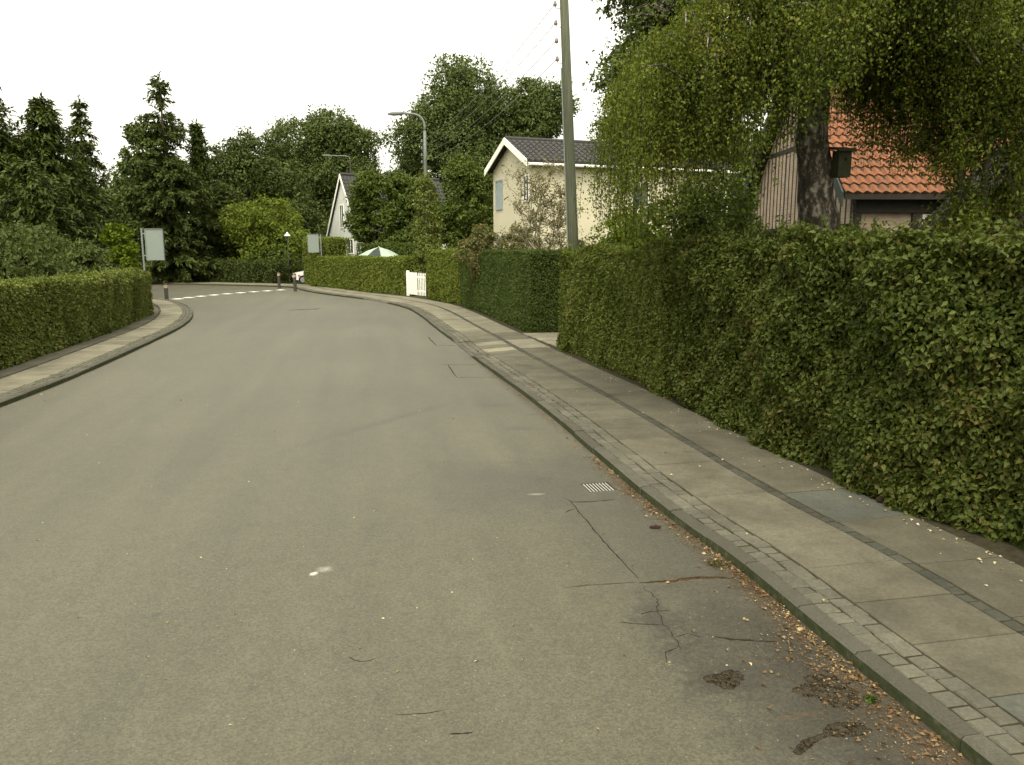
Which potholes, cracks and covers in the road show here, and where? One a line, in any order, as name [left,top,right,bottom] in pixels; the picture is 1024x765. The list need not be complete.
pothole [703,669,745,690]
pothole [792,673,861,710]
crack [565,500,733,662]
pothole [789,720,872,755]
drain grate [580,482,617,502]
